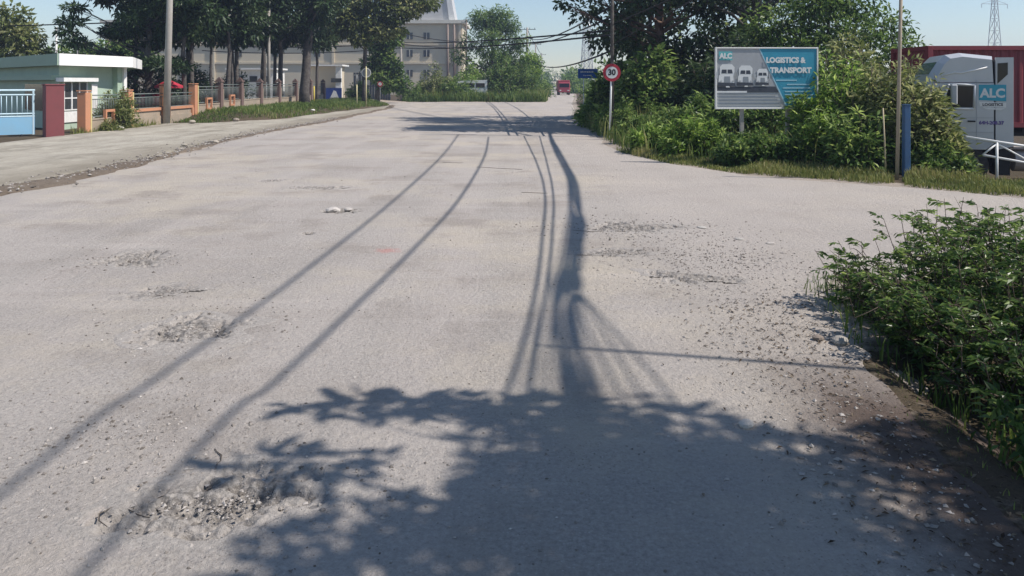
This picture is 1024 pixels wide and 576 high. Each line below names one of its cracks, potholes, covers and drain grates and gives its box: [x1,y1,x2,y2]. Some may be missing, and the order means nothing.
pothole [64,248,186,270]
pothole [567,220,697,234]
pothole [114,310,278,350]
pothole [108,281,218,301]
pothole [629,268,754,286]
pothole [56,454,374,551]
